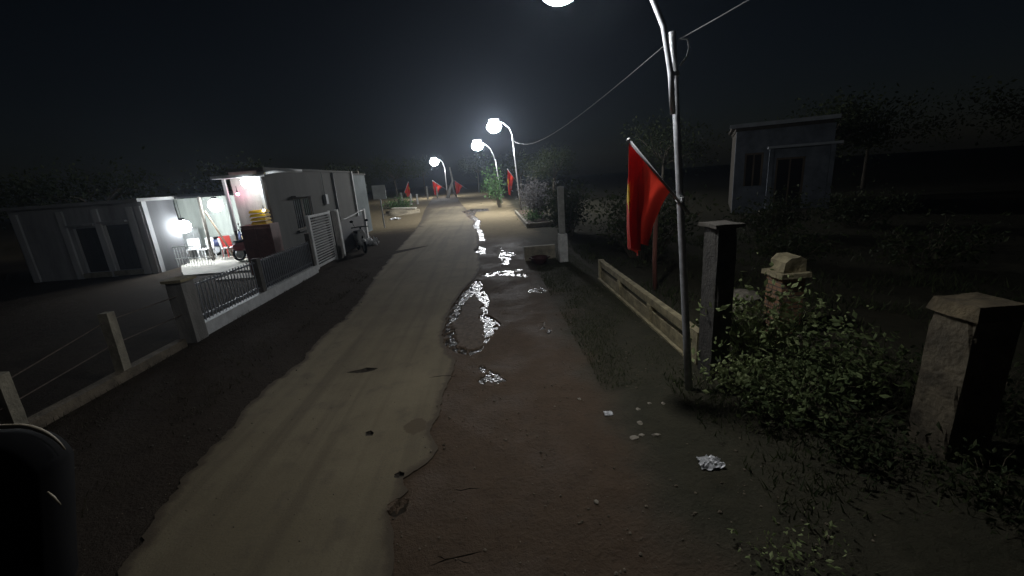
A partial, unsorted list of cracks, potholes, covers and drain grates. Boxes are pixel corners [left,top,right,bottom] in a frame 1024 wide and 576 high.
crack [431,551,482,566]
pothole [473,365,507,386]
pothole [461,209,489,242]
pothole [386,499,415,518]
pothole [473,245,488,255]
pothole [443,279,501,355]
